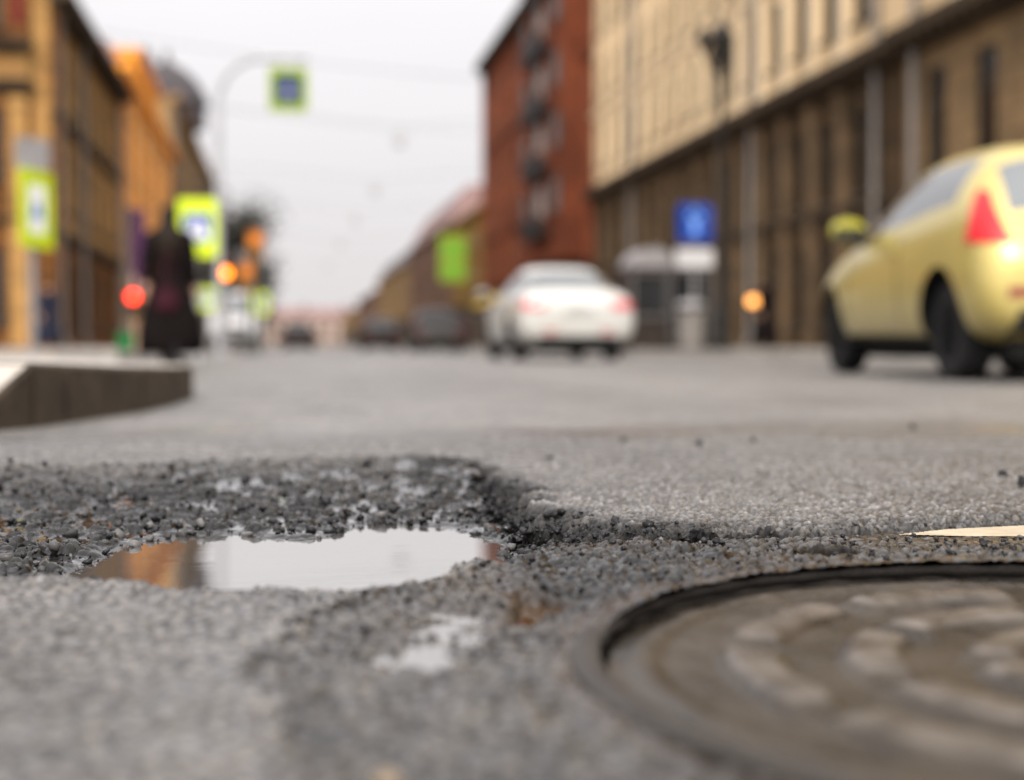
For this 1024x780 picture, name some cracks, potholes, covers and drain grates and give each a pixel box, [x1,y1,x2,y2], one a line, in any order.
manhole cover [571,564,1024,780]
pothole [0,453,548,586]
